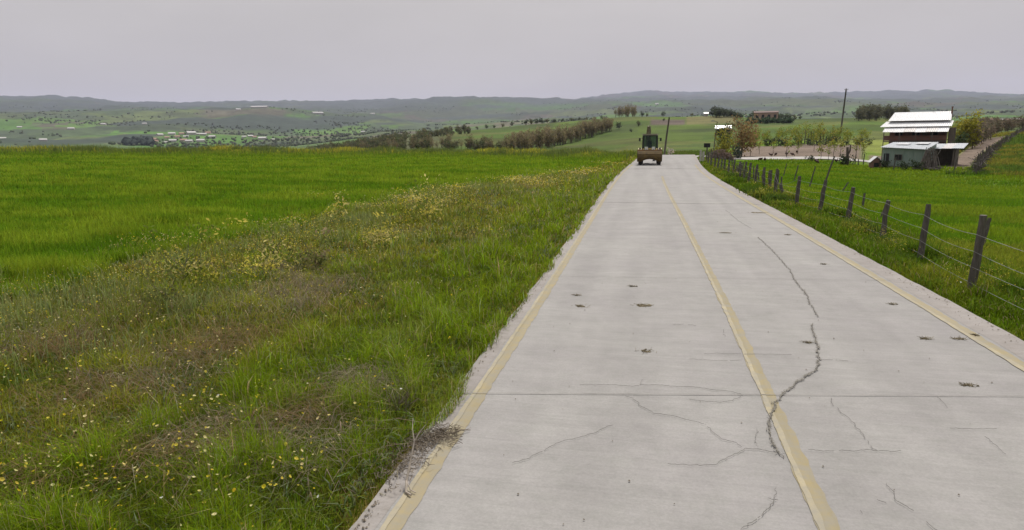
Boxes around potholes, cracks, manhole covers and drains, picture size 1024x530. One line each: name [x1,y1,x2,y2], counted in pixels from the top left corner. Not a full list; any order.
crack [580,224,844,466]
crack [808,398,901,452]
